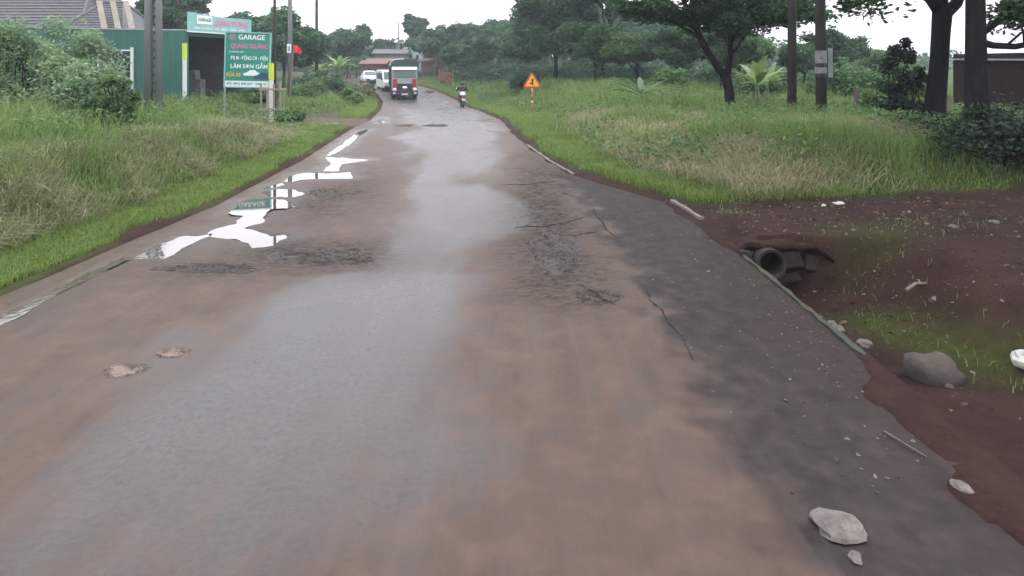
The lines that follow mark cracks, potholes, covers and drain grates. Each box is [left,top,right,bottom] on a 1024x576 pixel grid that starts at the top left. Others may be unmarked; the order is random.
pothole [102,363,152,378]
pothole [302,187,341,199]
crack [648,294,693,359]
pothole [574,288,623,306]
pothole [266,247,376,267]
pothole [155,347,189,358]
pothole [148,263,259,274]
crack [524,209,617,238]
pothole [525,233,584,275]
